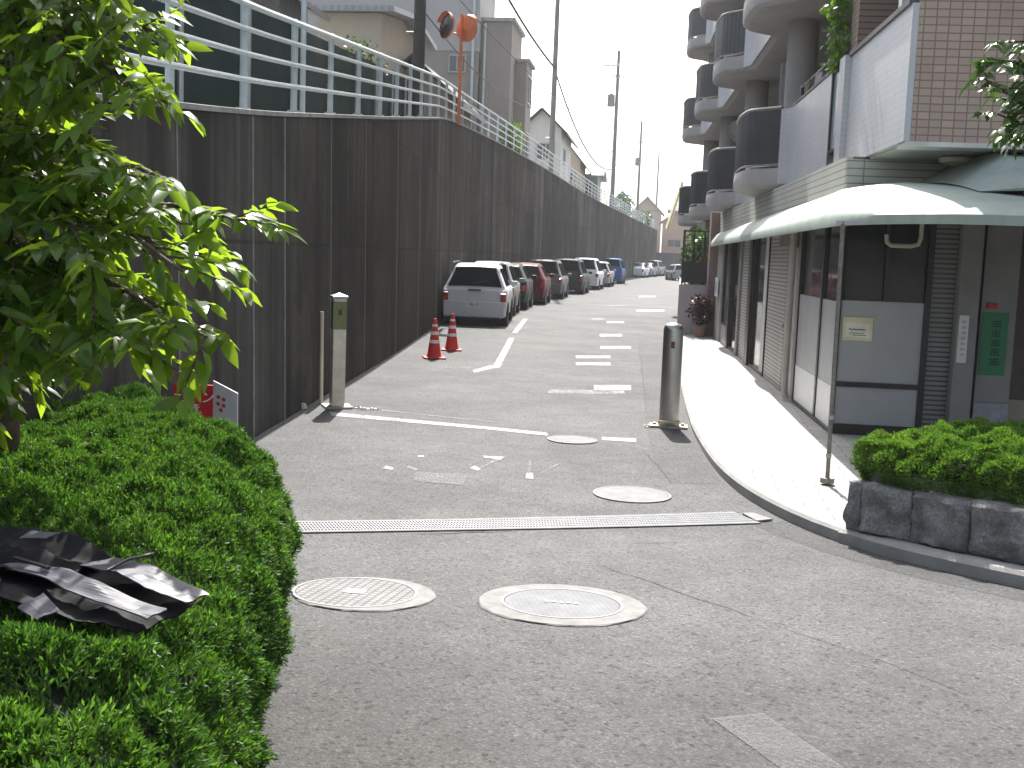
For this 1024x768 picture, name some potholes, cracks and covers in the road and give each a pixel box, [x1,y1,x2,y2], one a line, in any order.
manhole cover [547,435,597,444]
manhole cover [479,584,648,627]
drain grate [297,511,773,533]
crack [598,563,768,623]
crack [770,623,959,692]
manhole cover [292,577,436,612]
manhole cover [593,486,671,503]
